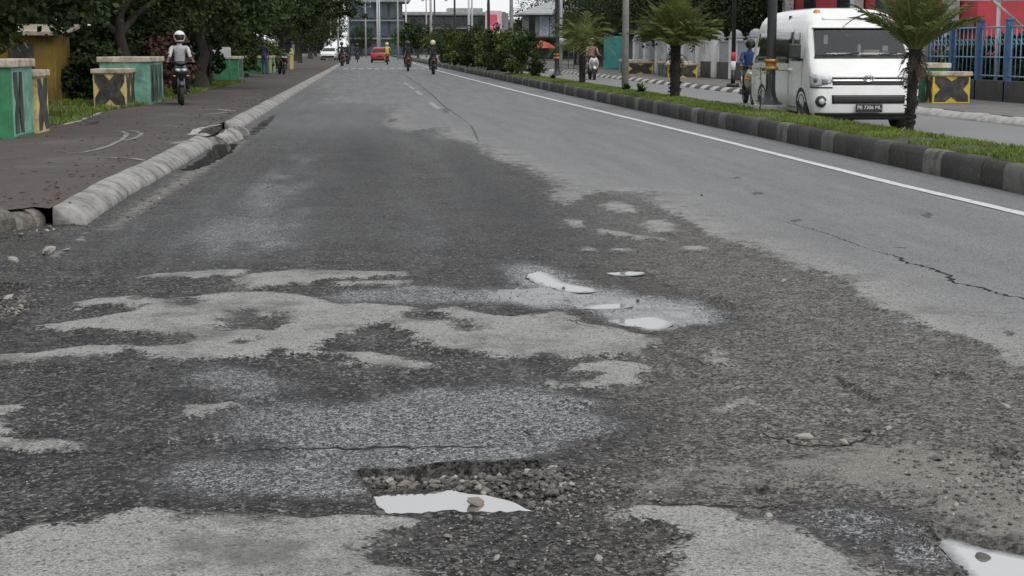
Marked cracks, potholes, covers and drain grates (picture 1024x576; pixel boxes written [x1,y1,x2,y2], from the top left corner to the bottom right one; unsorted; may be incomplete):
crack [0,429,531,456]
pothole [514,266,709,337]
crack [748,417,911,447]
pothole [355,460,578,511]
pothole [917,527,1024,576]
crack [777,219,1024,300]
